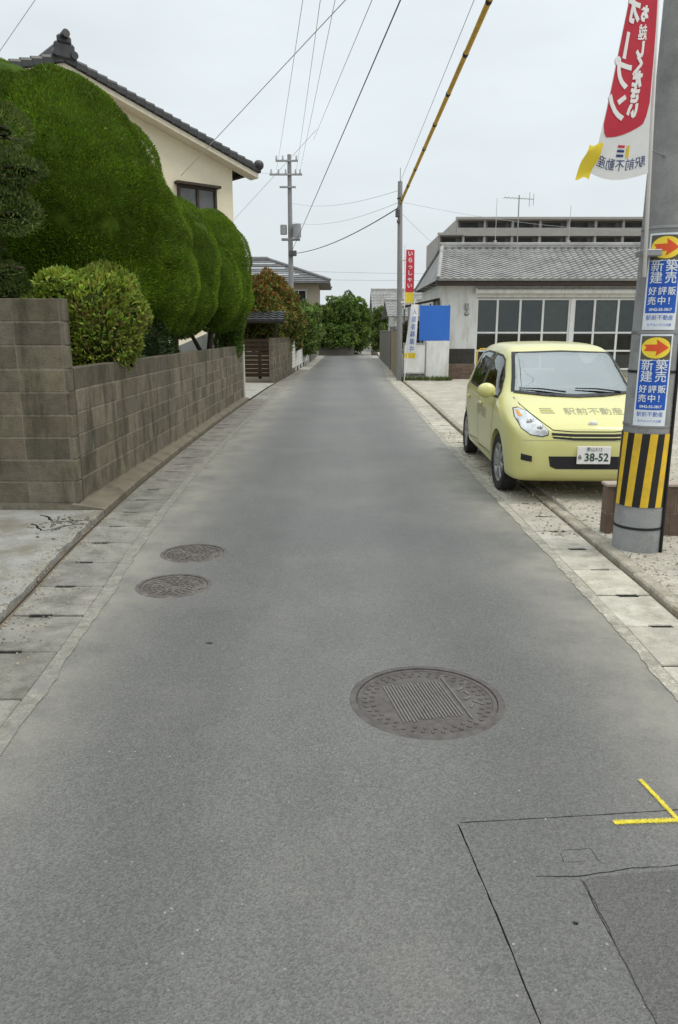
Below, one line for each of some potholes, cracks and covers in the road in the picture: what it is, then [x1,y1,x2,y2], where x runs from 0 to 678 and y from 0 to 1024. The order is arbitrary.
crack [31,515,86,531]
manhole cover [160,544,227,563]
manhole cover [135,574,212,598]
manhole cover [350,666,506,740]
